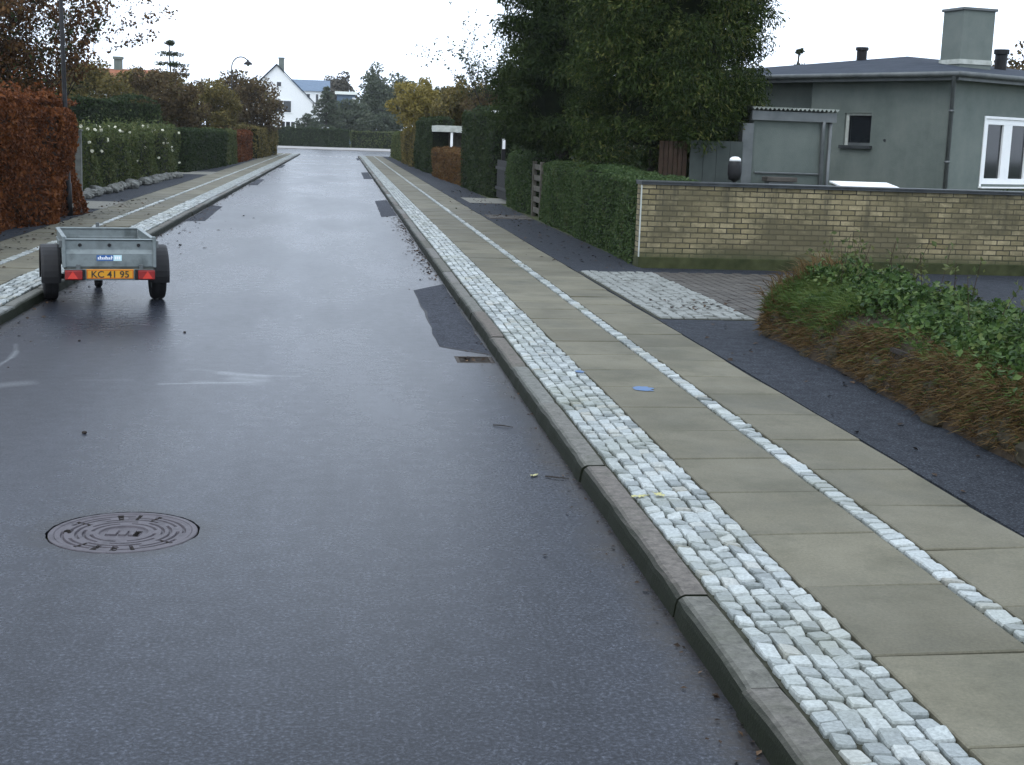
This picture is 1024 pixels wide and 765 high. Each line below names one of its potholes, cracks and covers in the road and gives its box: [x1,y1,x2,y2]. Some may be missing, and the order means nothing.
manhole cover [48,512,198,554]
